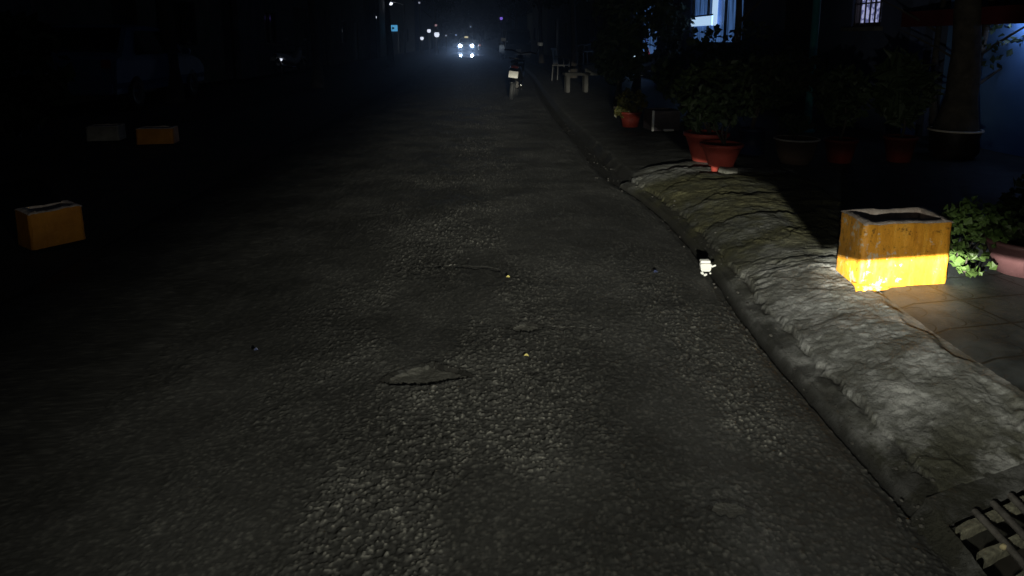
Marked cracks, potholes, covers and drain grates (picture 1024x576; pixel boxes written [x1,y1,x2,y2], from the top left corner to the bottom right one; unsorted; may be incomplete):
pothole [374,360,477,389]
crack [432,259,499,271]
pothole [505,321,549,335]
drain grate [951,487,1024,576]
